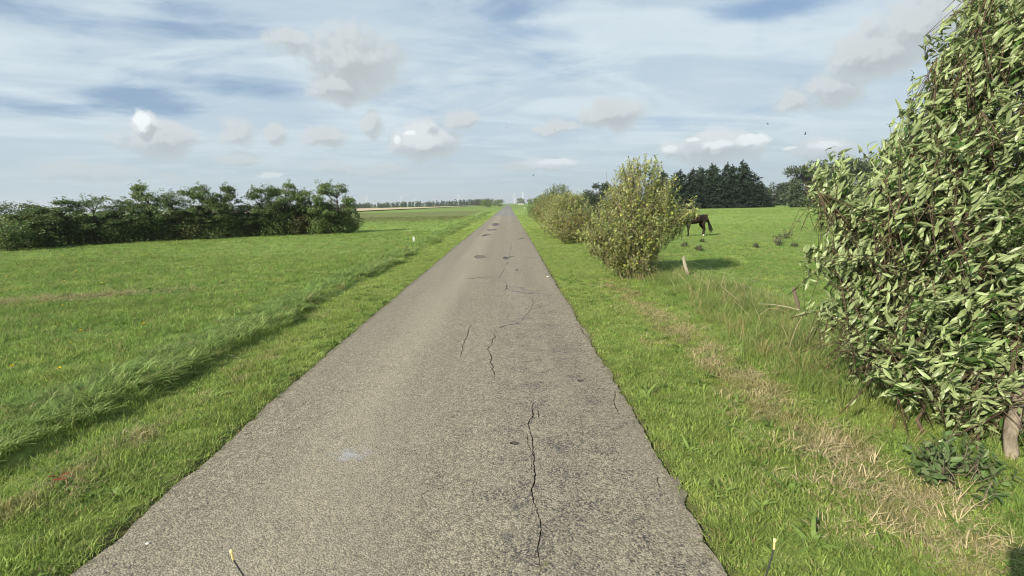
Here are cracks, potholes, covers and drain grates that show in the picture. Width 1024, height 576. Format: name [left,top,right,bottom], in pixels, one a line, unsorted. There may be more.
crack [527,404,542,571]
crack [467,238,546,295]
